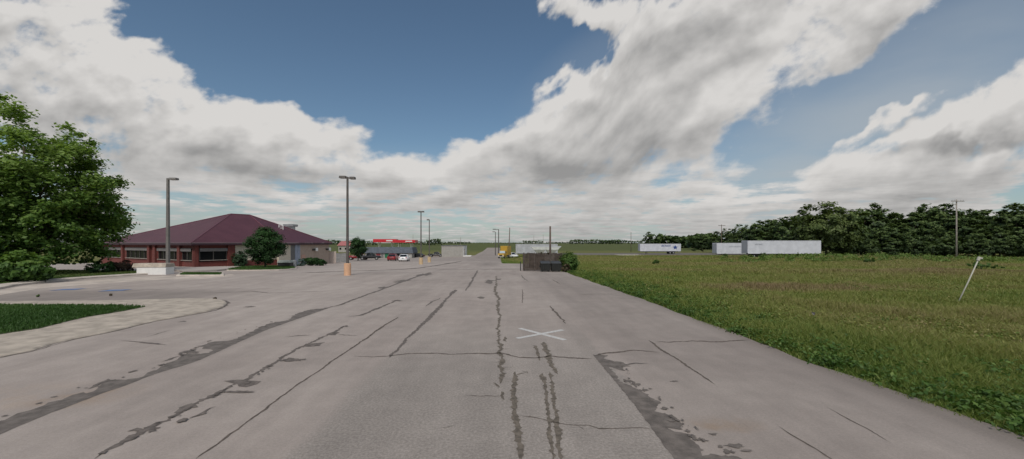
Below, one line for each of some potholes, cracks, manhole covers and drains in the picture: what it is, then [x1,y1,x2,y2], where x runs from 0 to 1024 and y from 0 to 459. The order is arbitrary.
crack [362,340,742,459]
